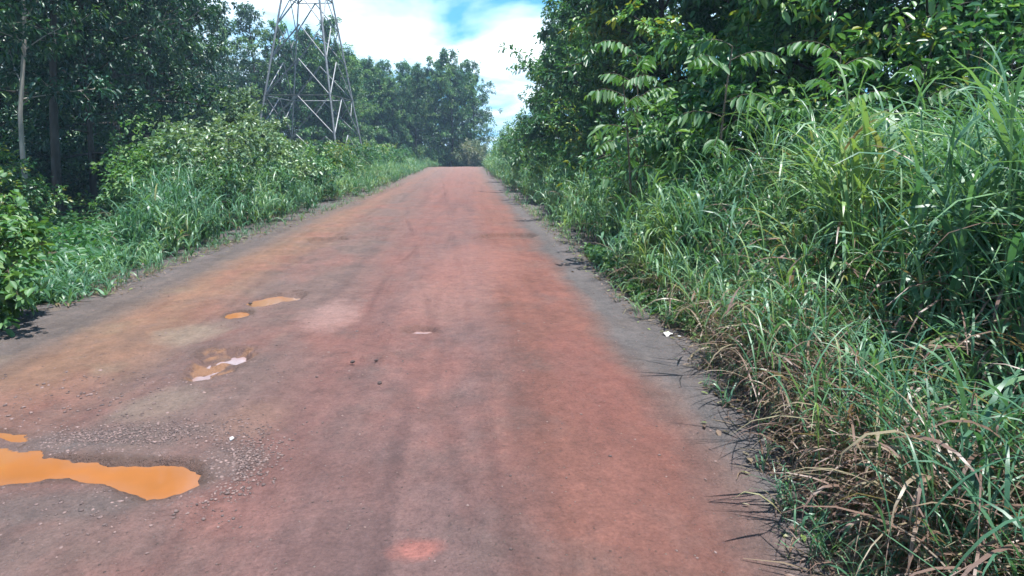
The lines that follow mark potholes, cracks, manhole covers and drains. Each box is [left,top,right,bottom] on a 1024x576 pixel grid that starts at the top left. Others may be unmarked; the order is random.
pothole [157,341,279,390]
pothole [229,287,323,312]
pothole [0,438,239,518]
